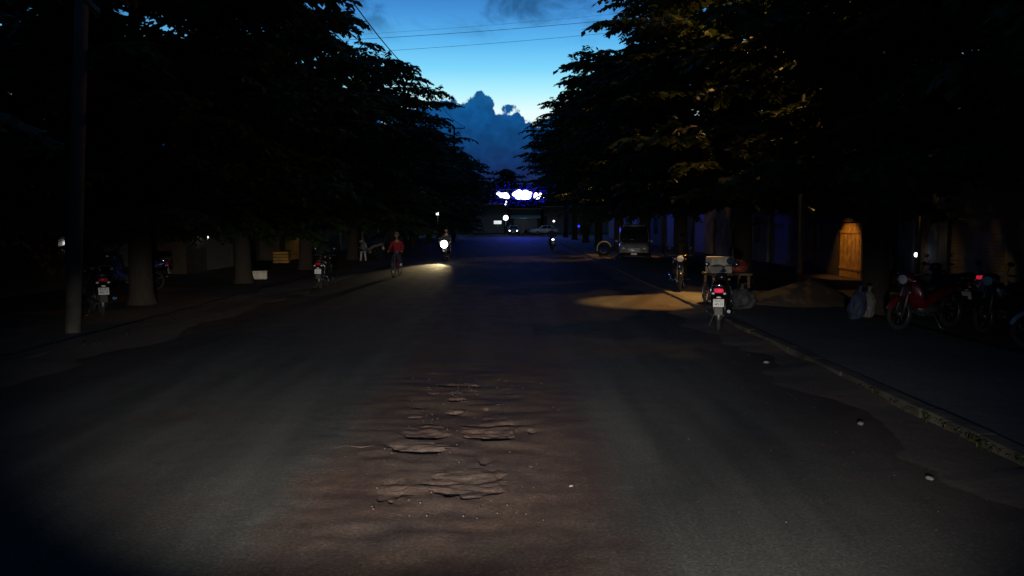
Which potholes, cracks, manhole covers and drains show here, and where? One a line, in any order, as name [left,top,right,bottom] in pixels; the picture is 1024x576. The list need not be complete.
pothole [386,442,453,454]
pothole [460,417,520,442]
pothole [376,478,409,505]
pothole [422,467,515,500]
pothole [399,425,452,440]
